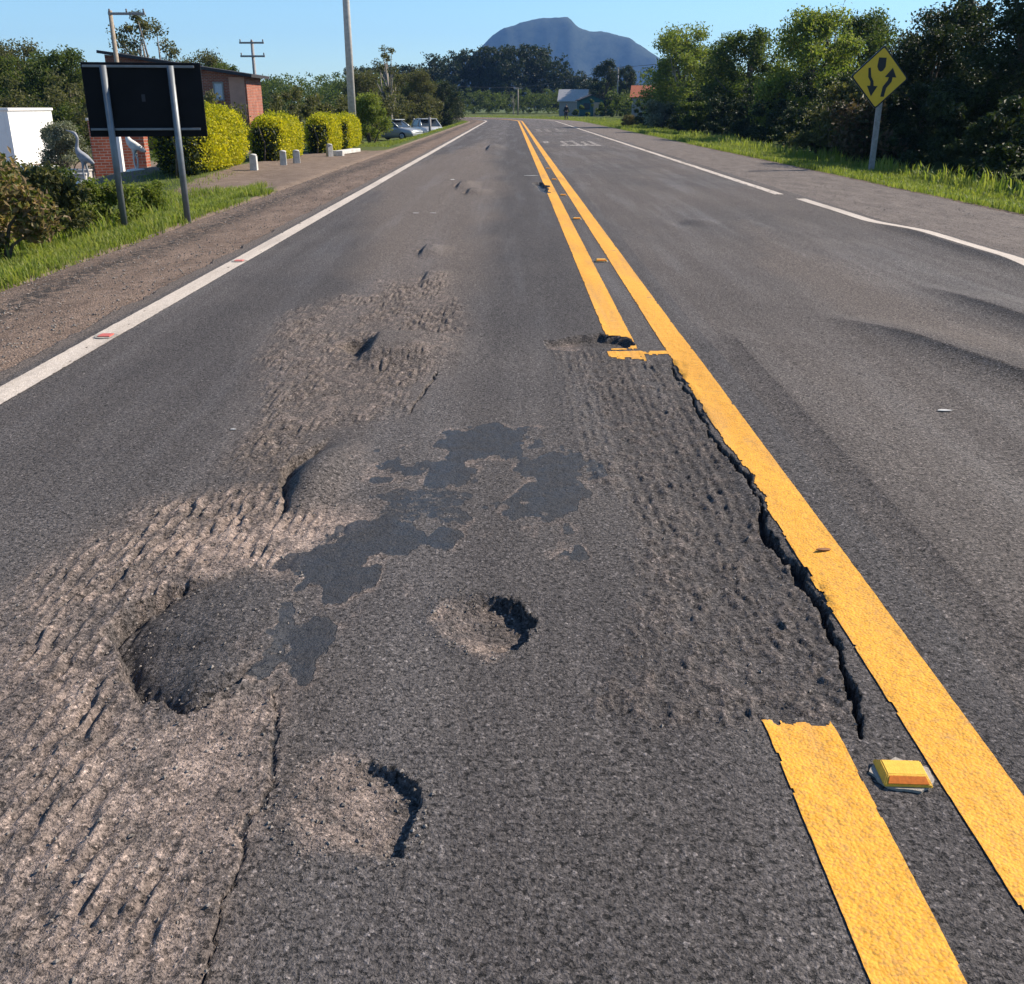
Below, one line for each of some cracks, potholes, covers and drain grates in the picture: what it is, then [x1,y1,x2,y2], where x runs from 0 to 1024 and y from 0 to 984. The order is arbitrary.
pothole [103,555,305,715]
crack [676,380,864,740]
pothole [416,243,437,255]
crack [410,374,437,414]
pothole [269,756,423,862]
pothole [277,428,381,516]
pothole [335,330,427,357]
pothole [544,334,635,352]
crack [203,688,281,978]
pothole [424,590,535,656]
